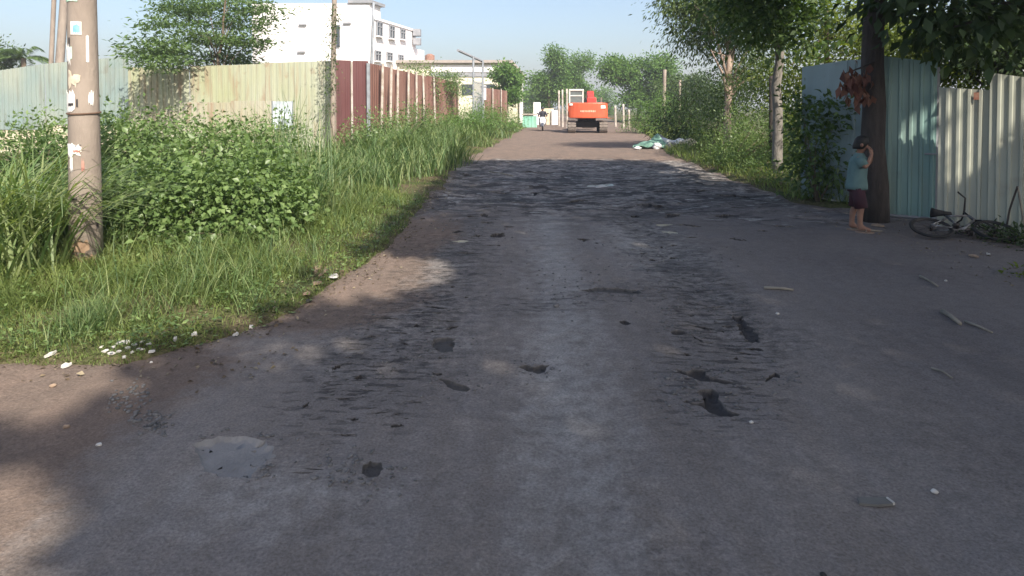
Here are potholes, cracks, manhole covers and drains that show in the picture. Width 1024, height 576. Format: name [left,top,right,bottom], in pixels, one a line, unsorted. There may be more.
pothole [683,389,740,417]
pothole [438,378,470,392]
pothole [732,315,761,343]
pothole [518,365,549,374]
pothole [432,337,456,353]
pothole [675,368,735,384]
pothole [362,461,384,478]
